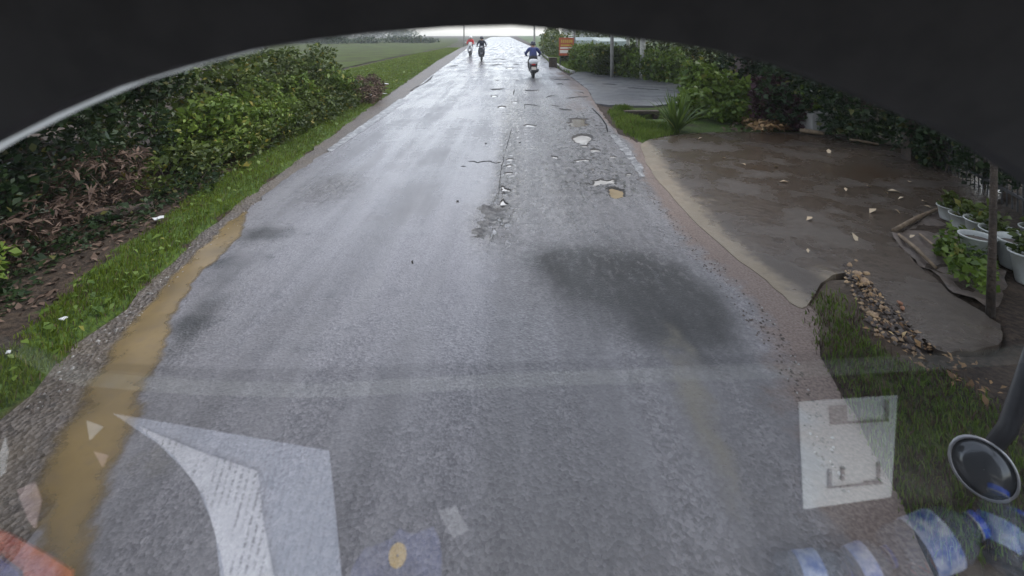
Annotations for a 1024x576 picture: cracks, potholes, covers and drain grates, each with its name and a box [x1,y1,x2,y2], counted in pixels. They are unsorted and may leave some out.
pothole [471,204,510,239]
pothole [583,178,619,187]
pothole [605,186,627,199]
pothole [571,133,595,146]
pothole [565,117,589,128]
crack [461,129,512,195]
crack [491,59,608,132]
